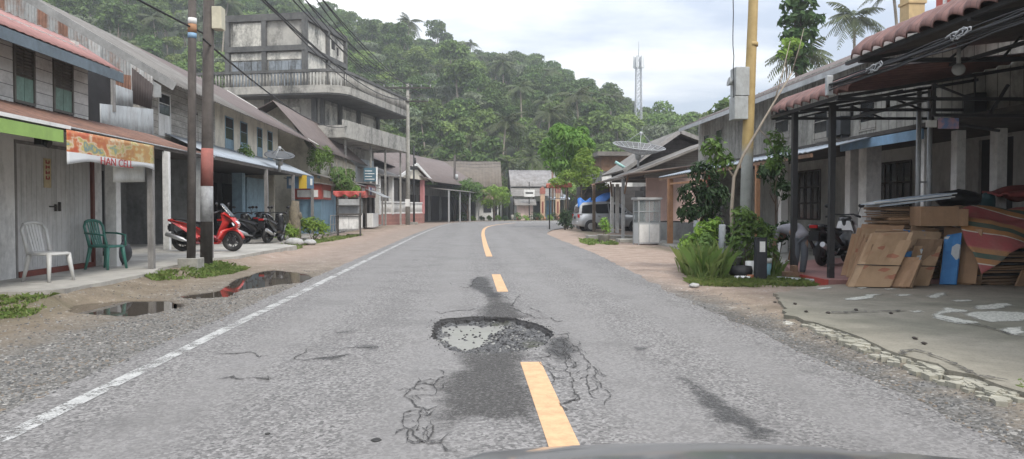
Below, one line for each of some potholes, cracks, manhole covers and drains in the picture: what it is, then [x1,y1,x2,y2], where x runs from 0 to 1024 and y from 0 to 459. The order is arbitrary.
pothole [431,316,554,354]
crack [460,277,614,410]
crack [395,370,451,451]
